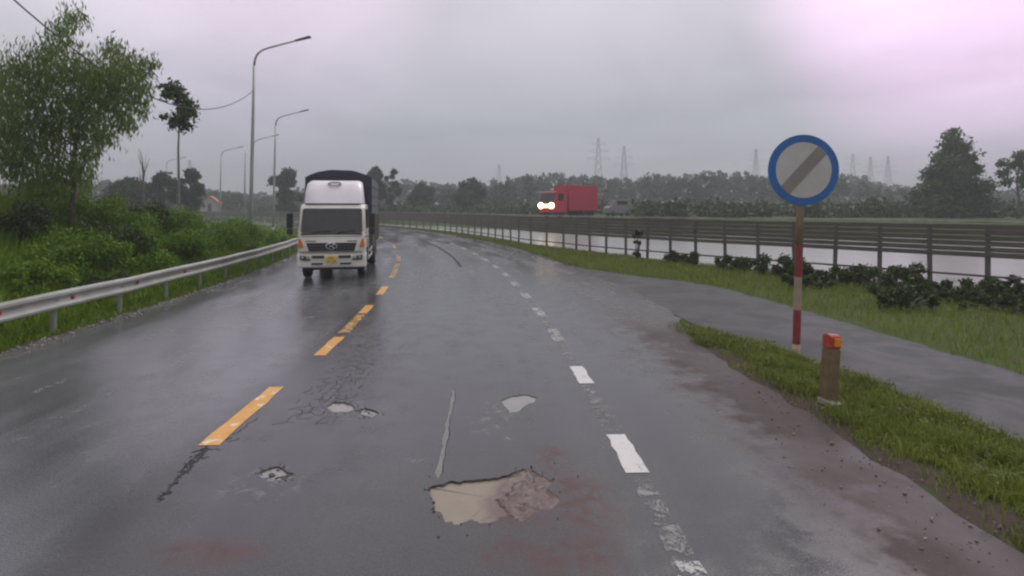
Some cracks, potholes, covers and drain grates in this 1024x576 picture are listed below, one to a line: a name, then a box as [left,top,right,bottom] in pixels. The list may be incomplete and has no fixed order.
pothole [501,394,539,413]
pothole [323,400,358,414]
pothole [357,405,384,418]
pothole [424,462,579,537]
crack [157,417,258,502]
pothole [255,463,295,481]
